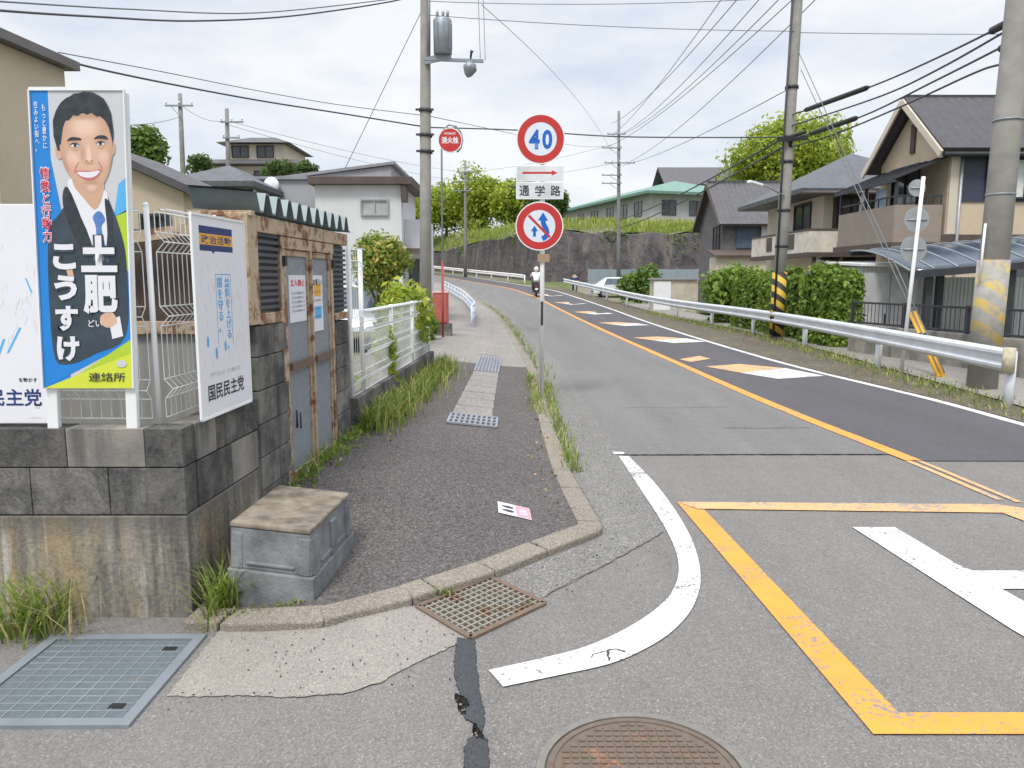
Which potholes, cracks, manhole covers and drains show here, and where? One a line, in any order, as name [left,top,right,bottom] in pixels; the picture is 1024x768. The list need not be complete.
manhole cover [535,712,750,768]
drain grate [446,412,498,428]
drain grate [415,576,547,640]
drain grate [474,356,501,373]
crack [547,531,663,595]
